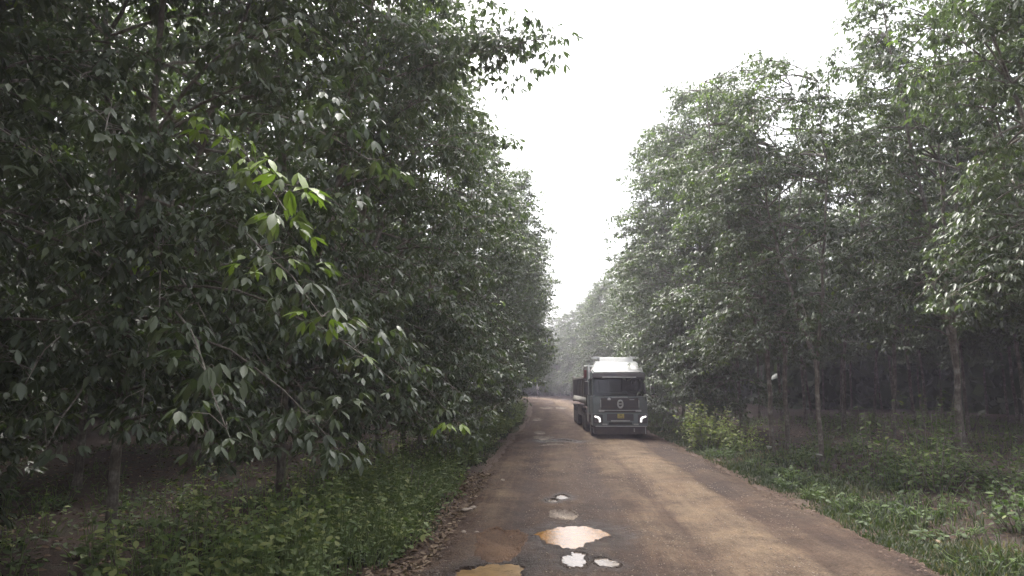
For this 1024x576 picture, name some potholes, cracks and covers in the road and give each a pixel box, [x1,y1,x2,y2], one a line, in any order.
pothole [444,562,530,576]
pothole [548,509,579,520]
pothole [558,550,590,569]
pothole [590,555,622,568]
pothole [529,526,616,552]
